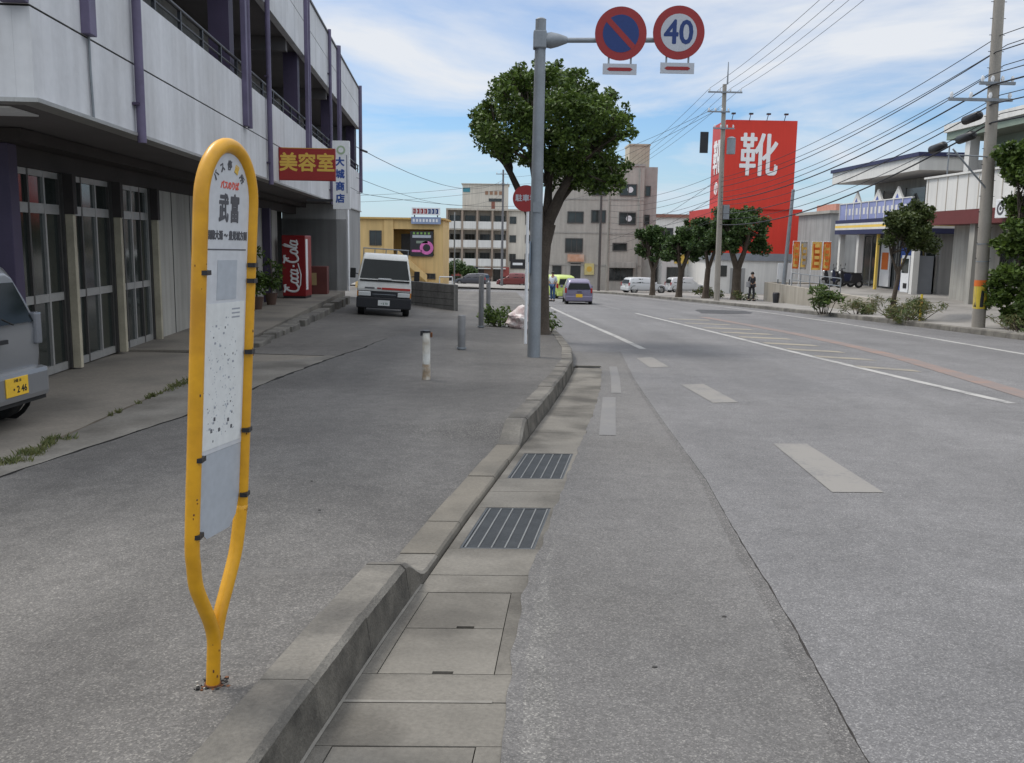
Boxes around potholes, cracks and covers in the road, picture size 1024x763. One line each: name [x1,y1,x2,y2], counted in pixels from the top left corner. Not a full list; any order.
drain grate [460,508,550,549]
drain grate [508,453,573,479]
